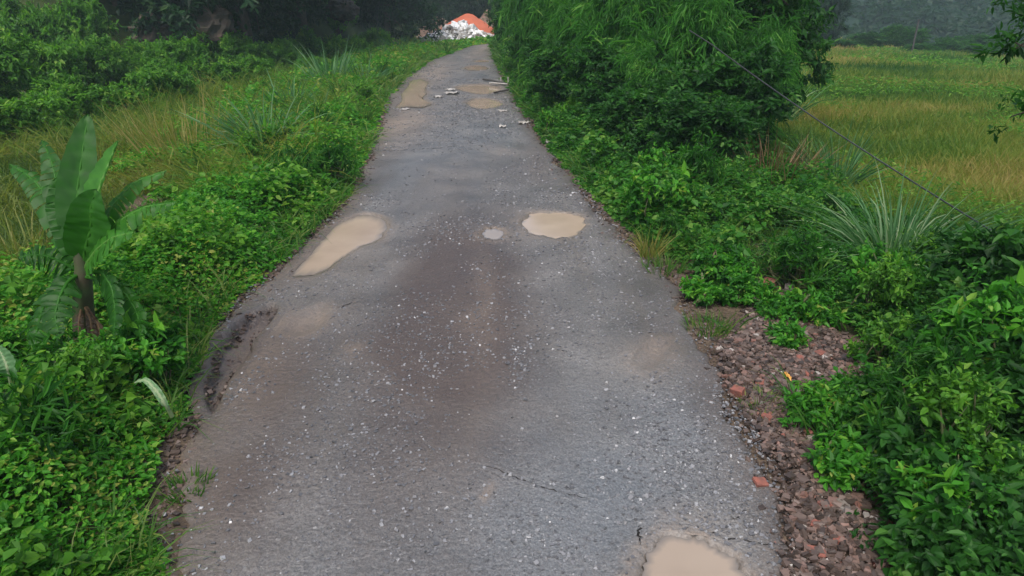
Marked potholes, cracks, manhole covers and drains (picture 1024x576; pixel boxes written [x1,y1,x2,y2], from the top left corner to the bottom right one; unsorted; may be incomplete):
pothole [188,300,287,422]
pothole [456,96,515,111]
pothole [278,210,397,280]
crack [479,461,592,504]
pothole [446,83,510,96]
pothole [628,526,761,576]
pothole [512,209,597,242]
pothole [471,225,515,243]
pothole [383,77,443,110]
crack [631,505,789,550]
